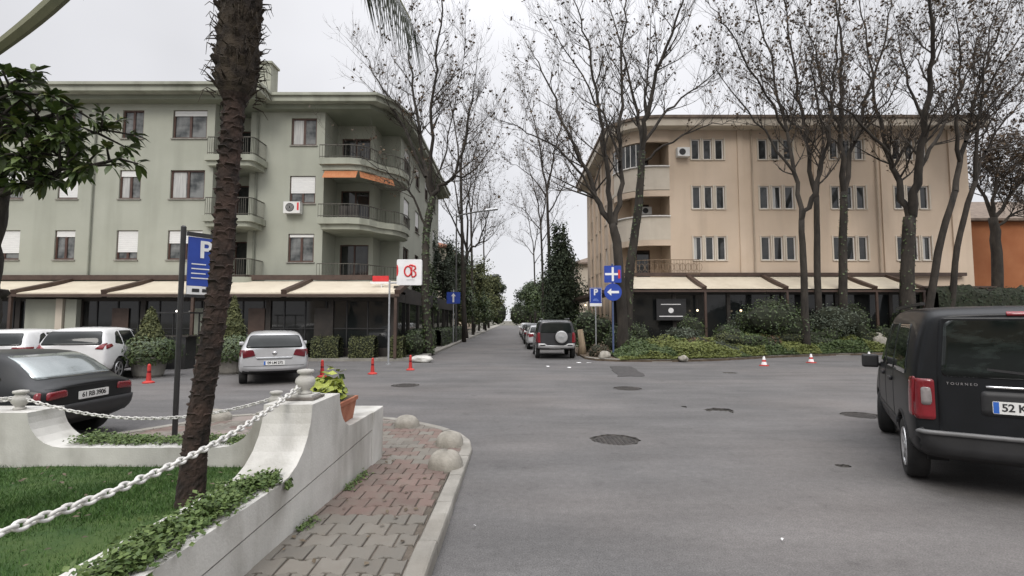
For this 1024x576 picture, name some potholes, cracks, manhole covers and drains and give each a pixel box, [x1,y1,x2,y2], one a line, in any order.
manhole cover [589,434,641,445]
